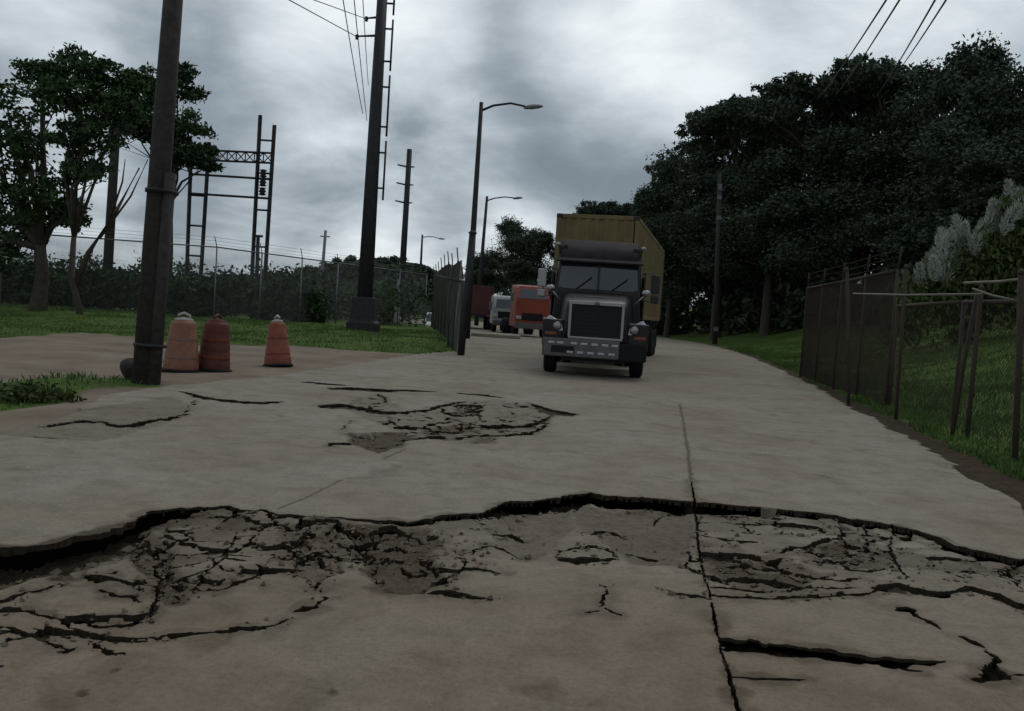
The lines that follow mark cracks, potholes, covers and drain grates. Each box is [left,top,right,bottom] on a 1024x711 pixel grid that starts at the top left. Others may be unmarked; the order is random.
pothole [0,521,142,590]
pothole [253,492,713,631]
crack [0,397,236,442]
